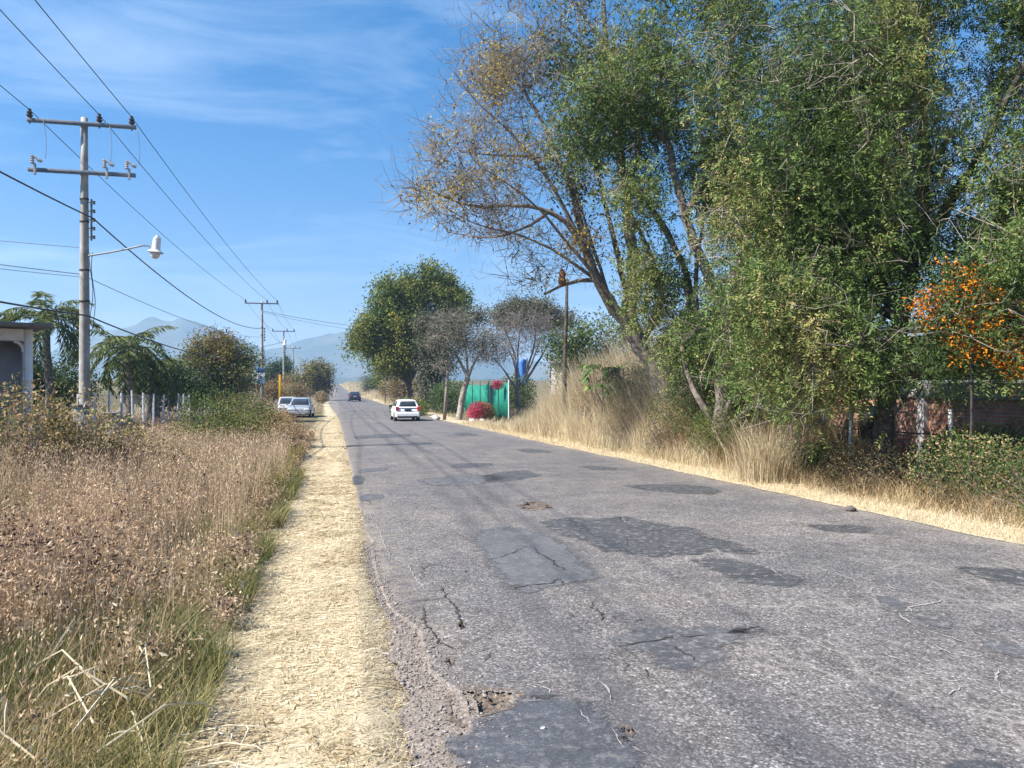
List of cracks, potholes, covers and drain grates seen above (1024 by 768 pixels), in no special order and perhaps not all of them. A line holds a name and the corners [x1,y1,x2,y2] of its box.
pothole [516,501,552,511]
pothole [618,725,635,741]
crack [367,500,495,661]
pothole [443,687,525,728]
